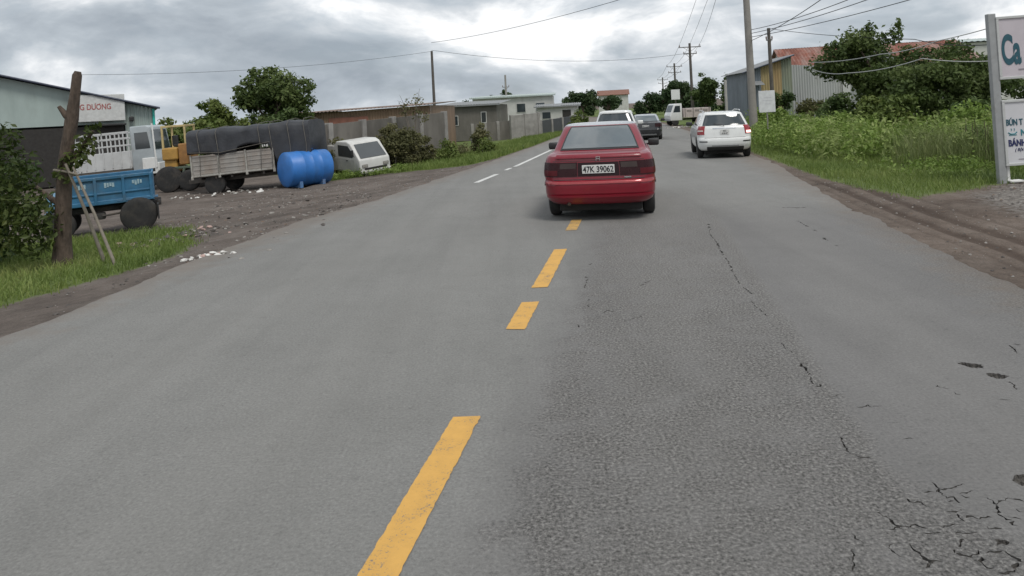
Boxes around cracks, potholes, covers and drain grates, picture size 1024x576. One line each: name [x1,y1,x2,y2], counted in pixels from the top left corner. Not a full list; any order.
crack [877,483,1022,575]
